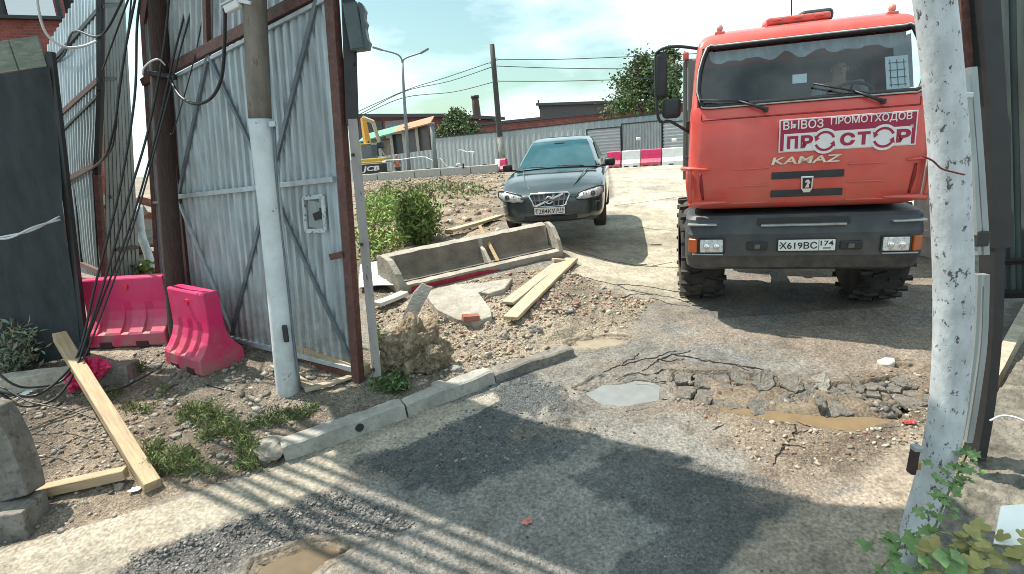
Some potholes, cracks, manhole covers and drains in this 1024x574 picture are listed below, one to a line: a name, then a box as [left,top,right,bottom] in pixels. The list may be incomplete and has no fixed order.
pothole [665,367,930,435]
crack [773,422,811,465]
crack [599,350,777,383]
crack [576,275,691,306]
pothole [240,534,357,574]
pothole [560,332,636,351]
